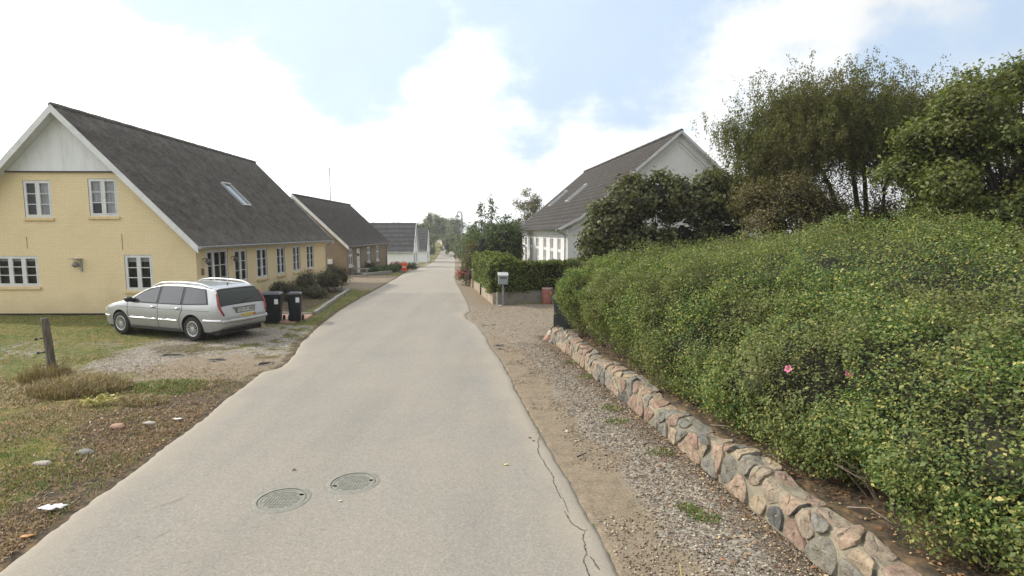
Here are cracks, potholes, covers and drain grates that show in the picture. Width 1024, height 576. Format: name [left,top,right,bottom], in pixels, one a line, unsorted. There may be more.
manhole cover [326,471,380,495]
crack [537,427,600,576]
manhole cover [251,487,311,513]
